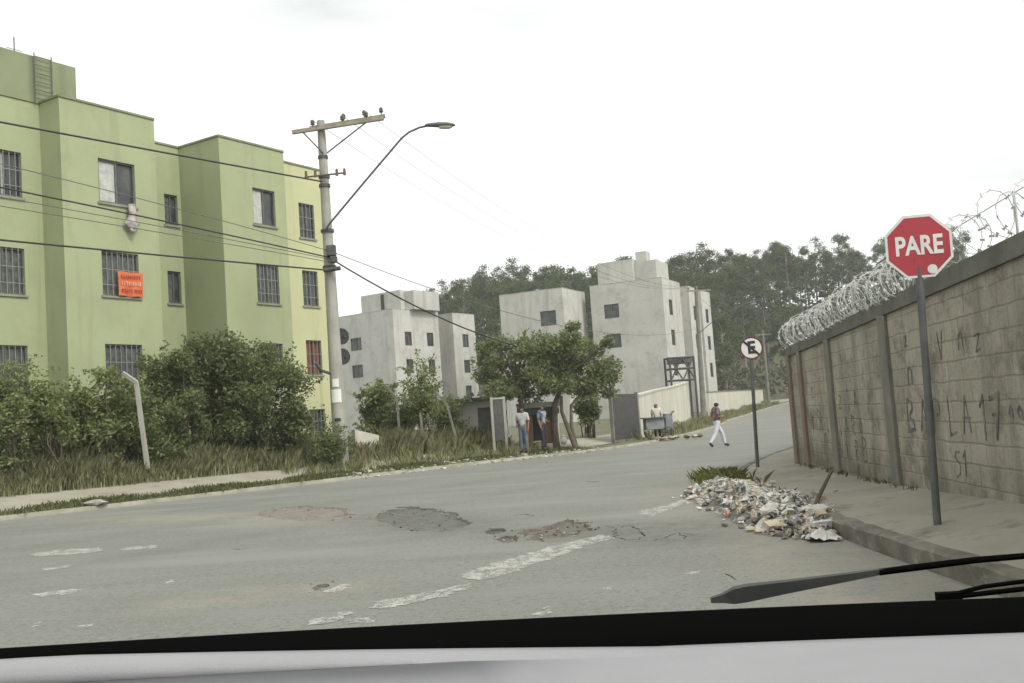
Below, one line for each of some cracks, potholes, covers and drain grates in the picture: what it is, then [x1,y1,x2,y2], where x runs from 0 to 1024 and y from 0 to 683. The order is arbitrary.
pothole [493,534,526,544]
pothole [517,519,600,542]
crack [606,526,690,541]
pothole [369,505,472,532]
